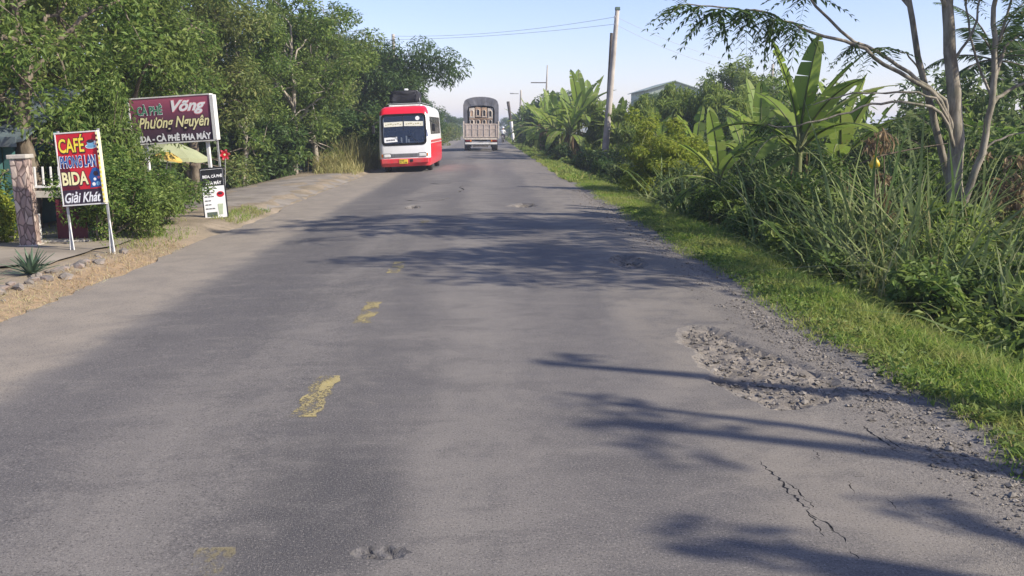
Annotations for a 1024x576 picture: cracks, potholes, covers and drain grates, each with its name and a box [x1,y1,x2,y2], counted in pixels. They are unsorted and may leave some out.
pothole [345,545,413,560]
crack [864,426,905,452]
crack [761,462,859,560]
pothole [608,254,649,269]
pothole [674,325,853,411]
